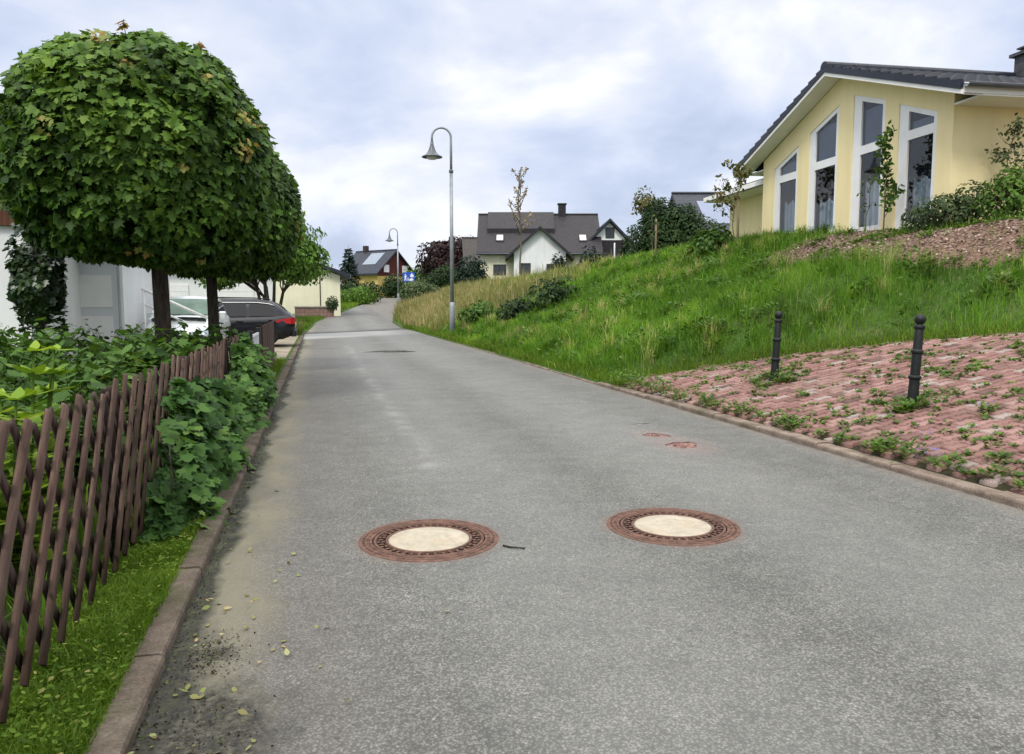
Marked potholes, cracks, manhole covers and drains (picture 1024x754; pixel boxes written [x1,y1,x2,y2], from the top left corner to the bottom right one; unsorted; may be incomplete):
manhole cover [358,519,499,562]
manhole cover [607,508,741,546]
